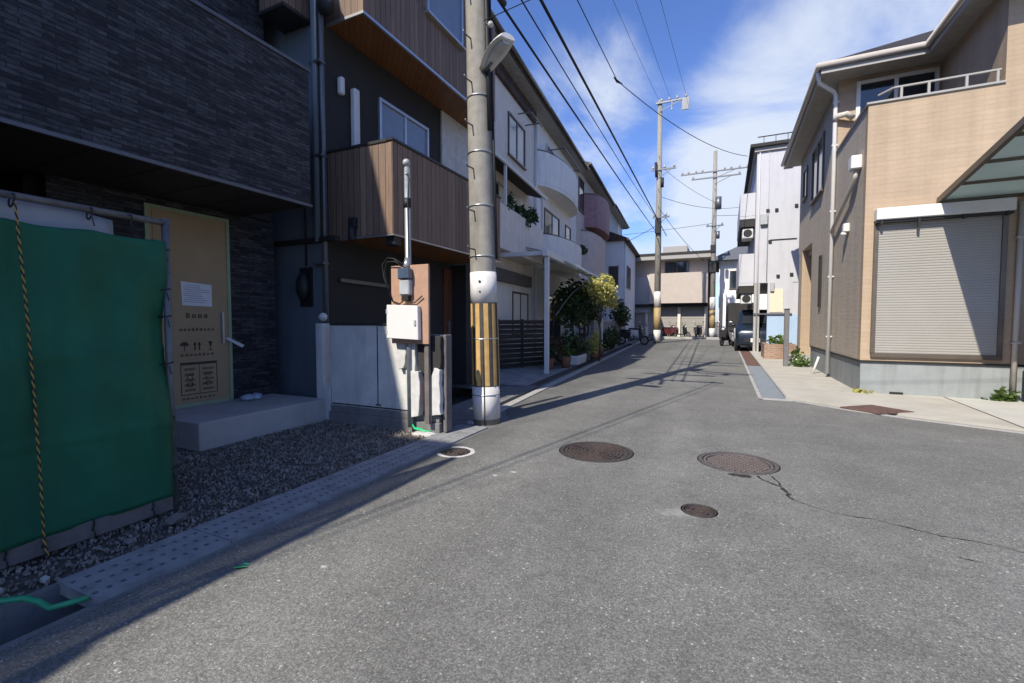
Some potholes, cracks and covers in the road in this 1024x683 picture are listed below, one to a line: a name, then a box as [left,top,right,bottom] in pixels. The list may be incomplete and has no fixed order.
manhole cover [698,452,780,483]
crack [758,475,1024,563]
drain grate [759,390,786,399]
manhole cover [437,446,475,458]
drain grate [755,383,779,391]
manhole cover [682,504,717,518]
manhole cover [560,441,633,463]
